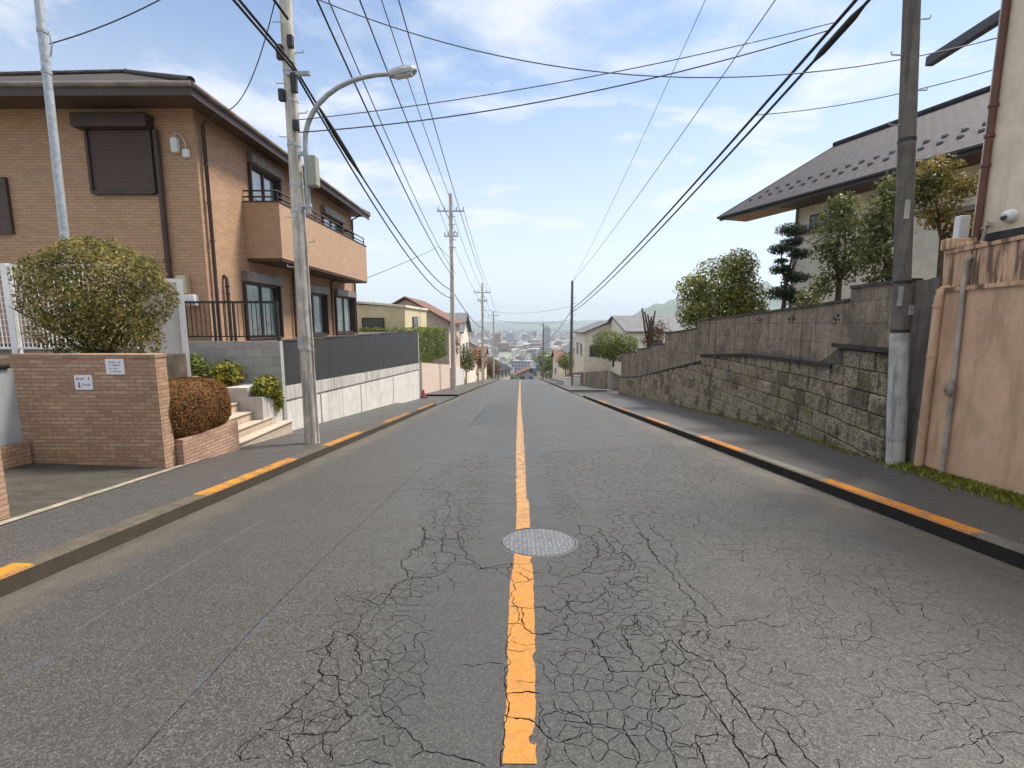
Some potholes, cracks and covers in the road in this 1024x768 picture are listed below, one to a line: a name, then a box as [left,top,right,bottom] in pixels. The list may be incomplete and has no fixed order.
crack [539,443,831,563]
crack [505,515,843,768]
manhole cover [499,528,578,557]
crack [234,453,532,768]
crack [740,545,1024,764]
